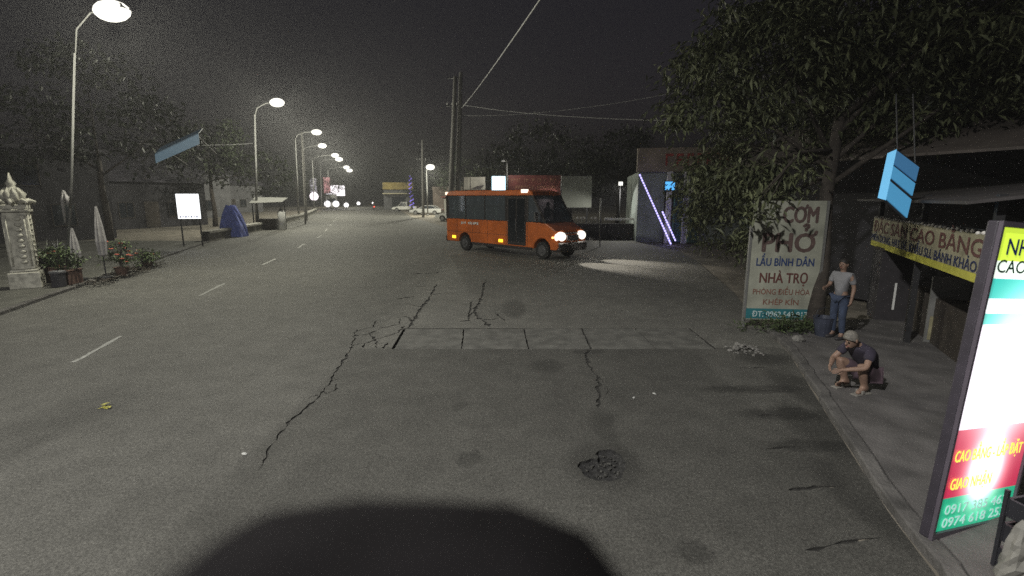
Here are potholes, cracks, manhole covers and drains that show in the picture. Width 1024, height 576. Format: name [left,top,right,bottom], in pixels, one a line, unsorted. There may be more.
crack [459,279,505,326]
crack [584,350,608,407]
pothole [578,449,626,481]
crack [260,271,443,468]
